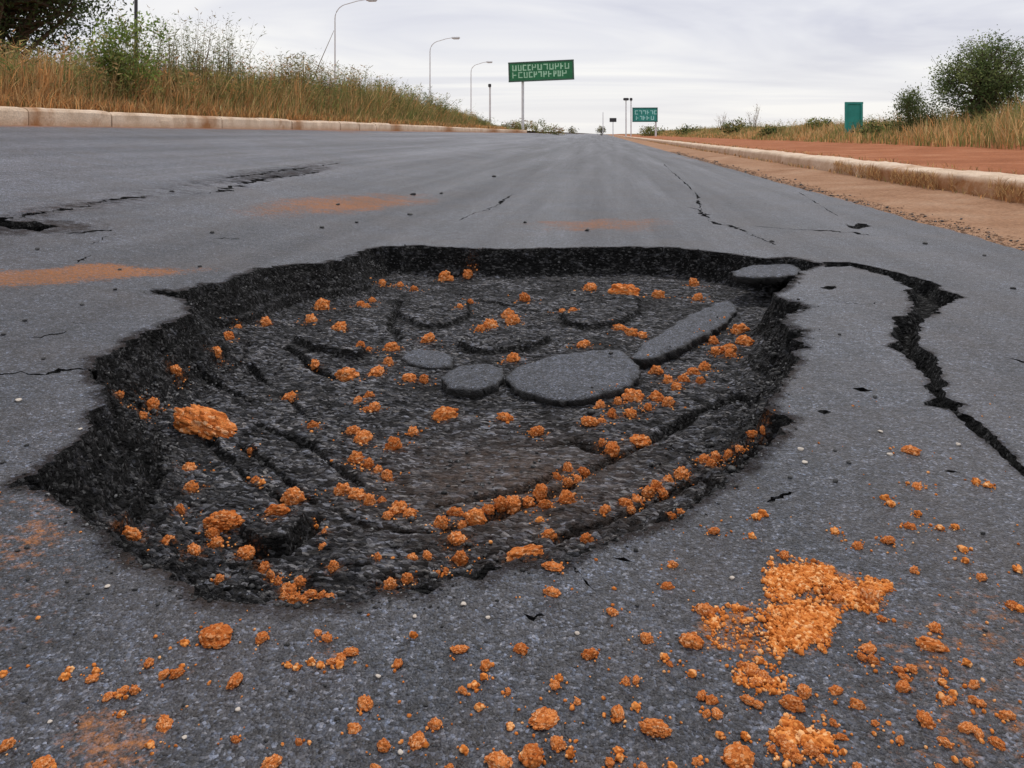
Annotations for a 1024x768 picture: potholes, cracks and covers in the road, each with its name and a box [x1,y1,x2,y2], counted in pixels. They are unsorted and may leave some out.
crack [0,368,98,380]
pothole [9,245,823,605]
crack [196,163,338,194]
crack [664,164,868,245]
crack [0,196,147,263]
crack [822,262,1024,476]
